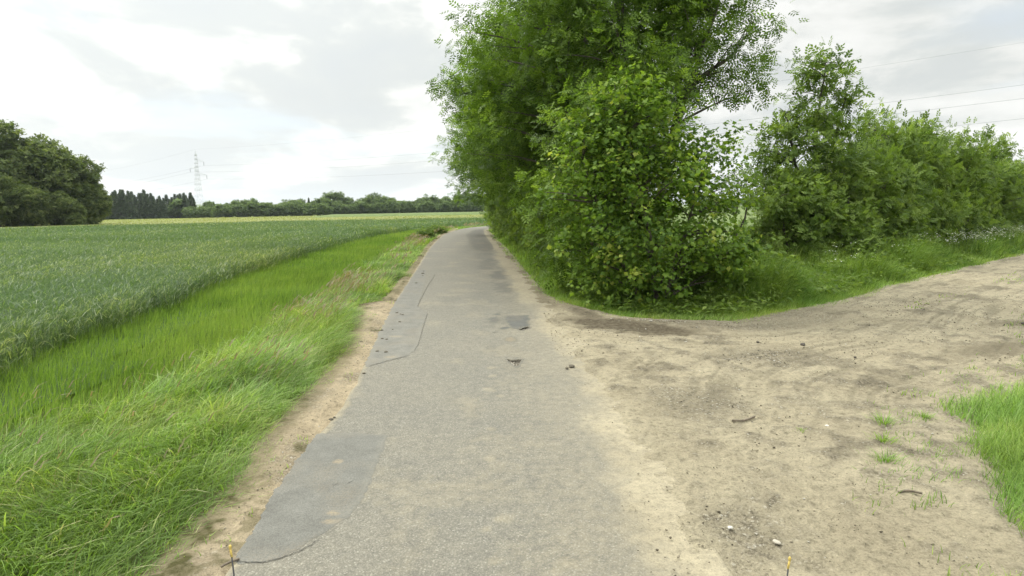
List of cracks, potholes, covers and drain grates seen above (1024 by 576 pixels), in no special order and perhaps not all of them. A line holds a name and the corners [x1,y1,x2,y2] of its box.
pothole [504,358,524,368]
